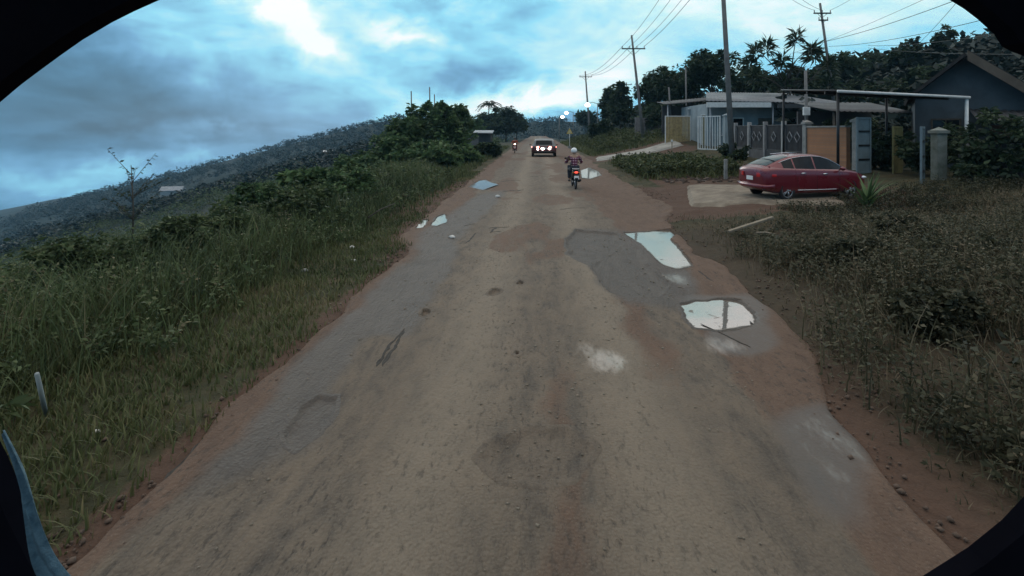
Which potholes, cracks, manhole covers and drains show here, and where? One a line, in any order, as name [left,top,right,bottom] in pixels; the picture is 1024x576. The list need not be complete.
crack [376,329,405,367]
pothole [676,297,757,332]
pothole [278,392,341,455]
pothole [622,229,693,270]
pothole [485,287,504,296]
pothole [418,307,434,317]
pothole [564,228,672,298]
